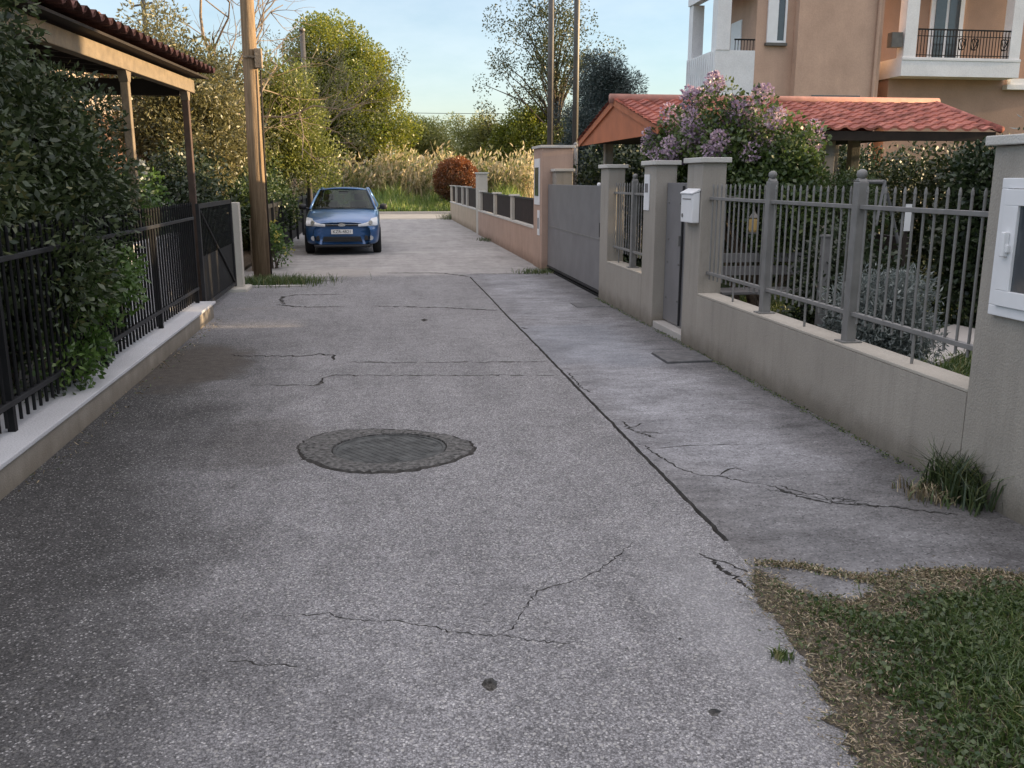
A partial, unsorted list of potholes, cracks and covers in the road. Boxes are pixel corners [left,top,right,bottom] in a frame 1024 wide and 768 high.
crack [234,273,958,644]
manhole cover [296,428,477,474]
pothole [481,678,498,691]
